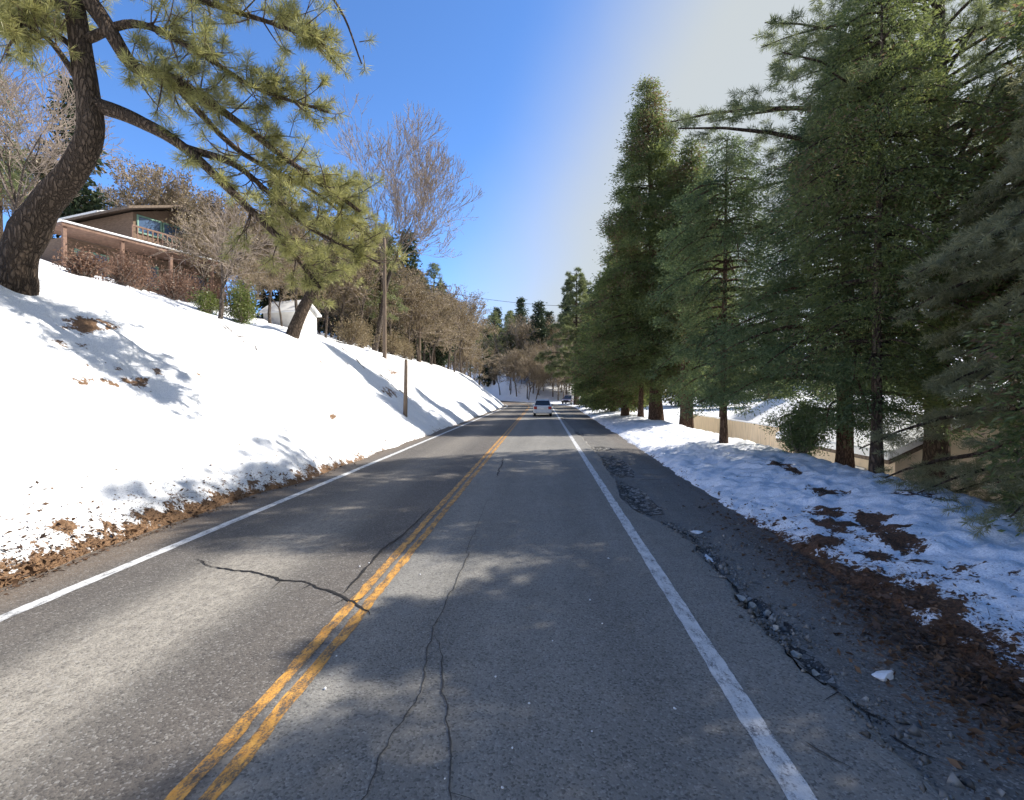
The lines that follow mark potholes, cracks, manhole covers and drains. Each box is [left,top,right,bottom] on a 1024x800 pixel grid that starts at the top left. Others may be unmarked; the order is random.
crack [705,565,753,593]
crack [192,500,488,800]
pothole [617,485,663,515]
pothole [602,457,634,477]
